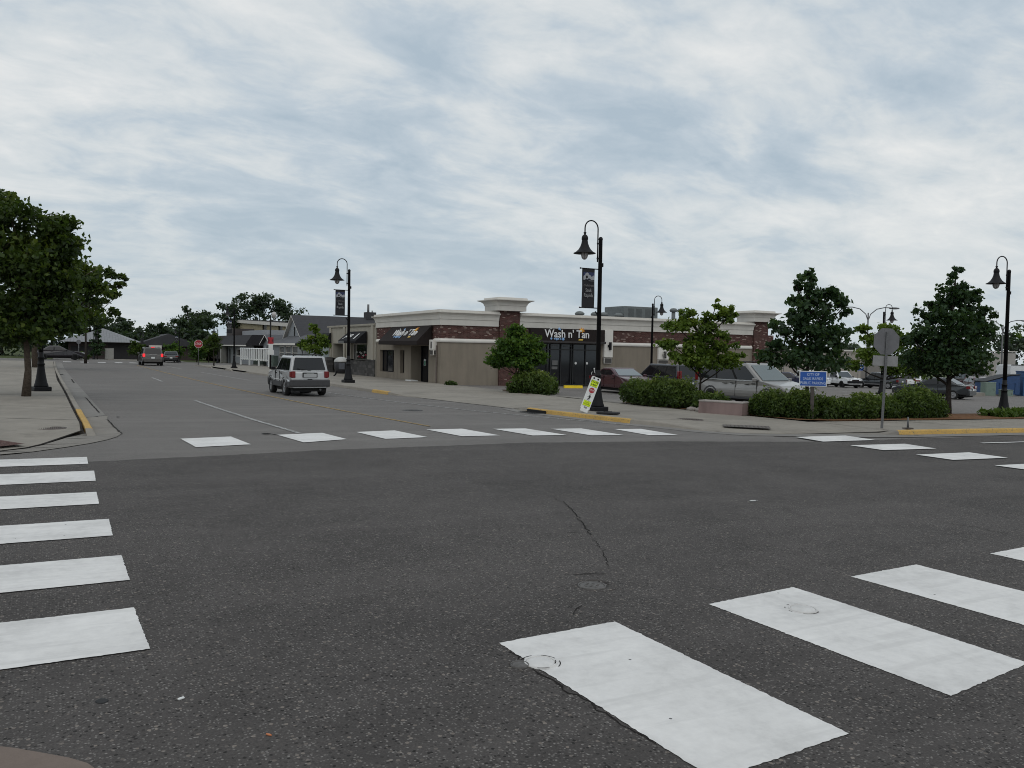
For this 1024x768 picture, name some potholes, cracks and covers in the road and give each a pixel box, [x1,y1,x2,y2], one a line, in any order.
utility cover [784,604,818,614]
utility cover [570,573,619,592]
utility cover [521,655,561,669]
crack [556,499,608,565]
